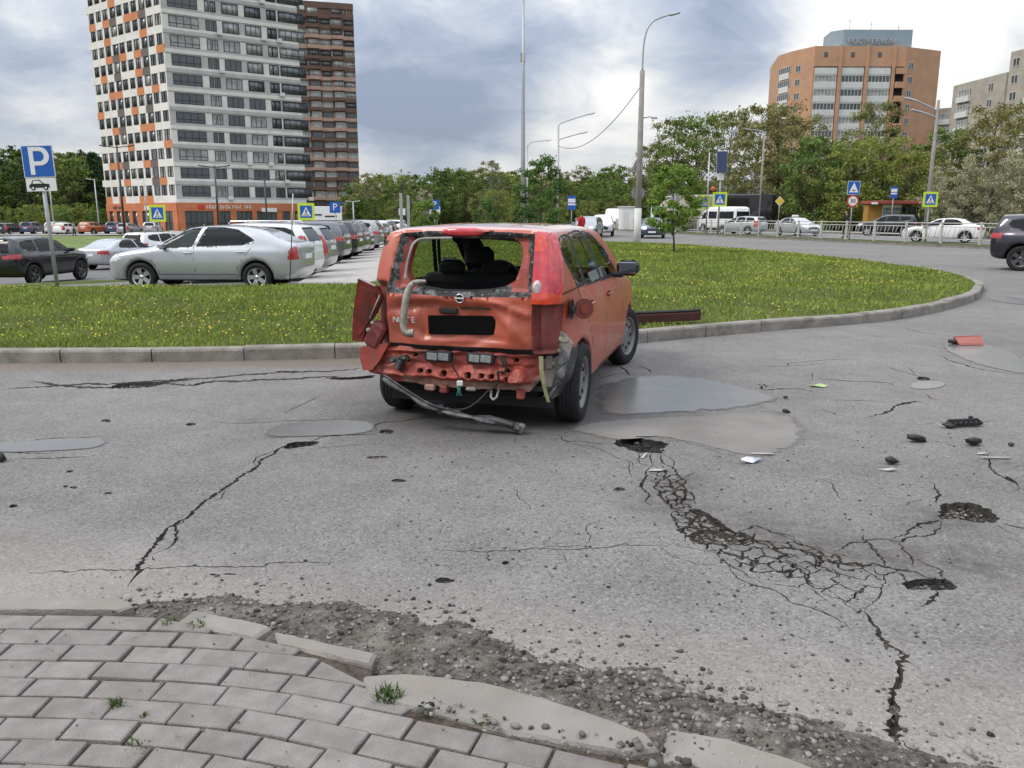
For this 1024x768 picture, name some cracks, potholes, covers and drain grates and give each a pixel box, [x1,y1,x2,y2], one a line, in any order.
crack [987,452,1019,491]
crack [6,368,436,586]
pothole [614,438,668,454]
crack [554,434,947,749]
pothole [901,578,957,590]
pothole [937,502,1000,523]
crack [440,520,656,560]
crack [757,327,1022,418]
